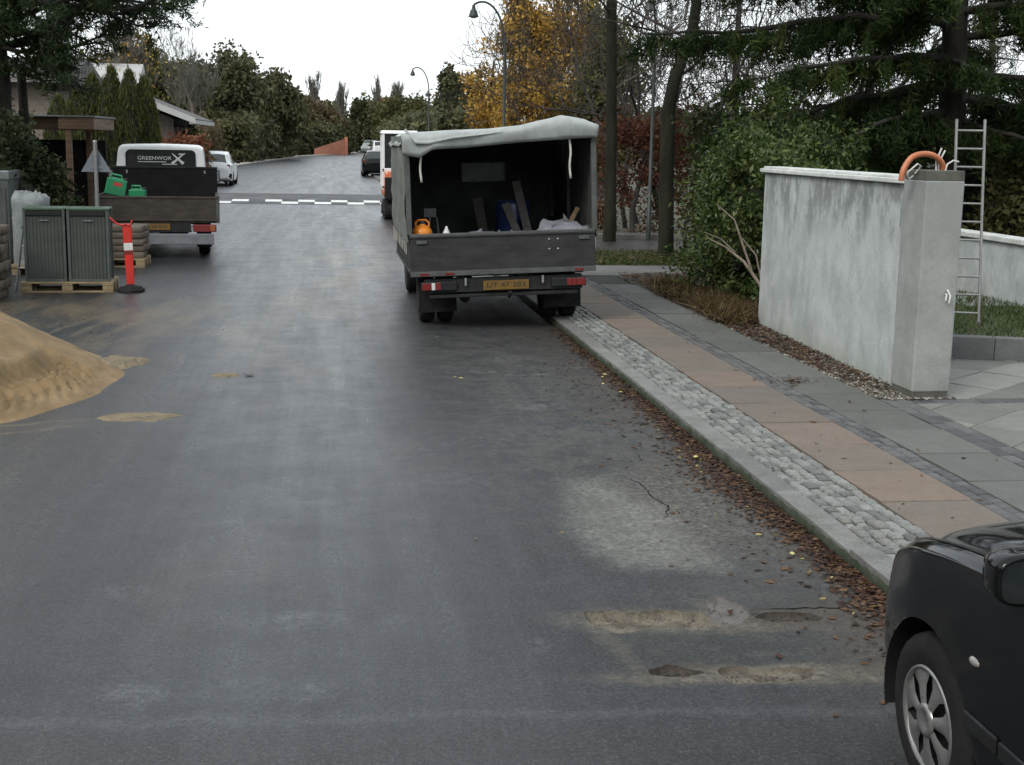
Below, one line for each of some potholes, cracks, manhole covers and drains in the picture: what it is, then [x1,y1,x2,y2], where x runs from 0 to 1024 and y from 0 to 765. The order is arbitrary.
pothole [718,666,817,684]
pothole [648,664,705,677]
pothole [584,610,709,633]
pothole [755,612,823,622]
crack [622,475,670,516]
